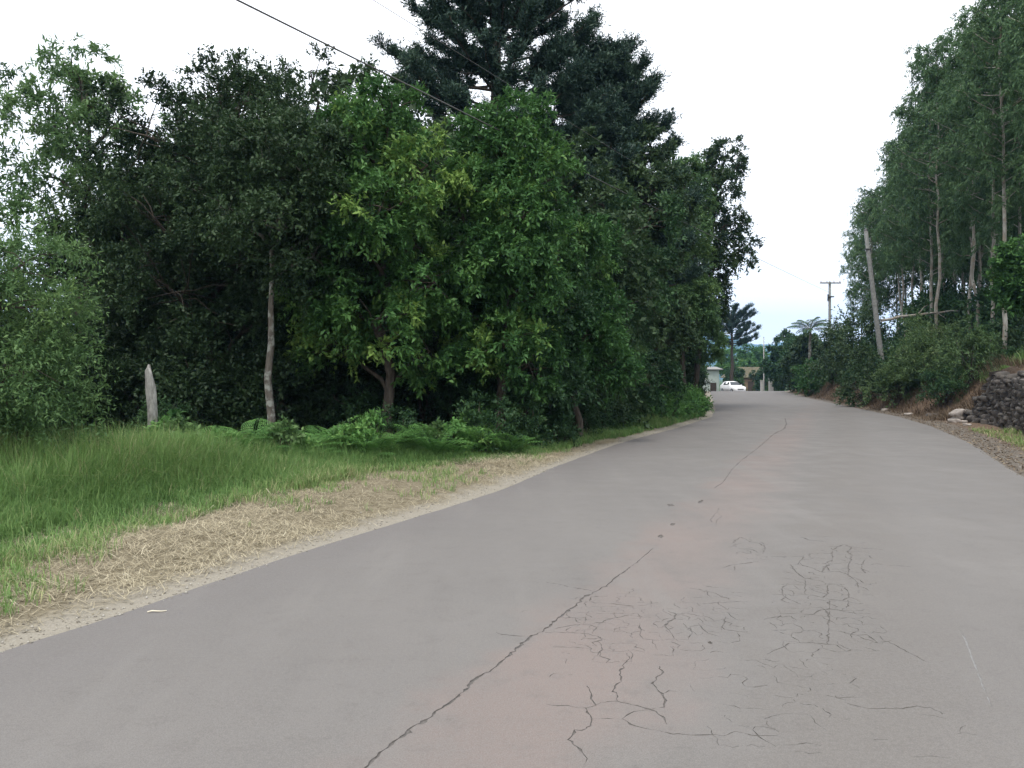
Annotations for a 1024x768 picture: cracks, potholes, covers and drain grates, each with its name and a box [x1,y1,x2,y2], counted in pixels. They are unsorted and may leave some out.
crack [364,549,975,768]
crack [726,537,767,570]
